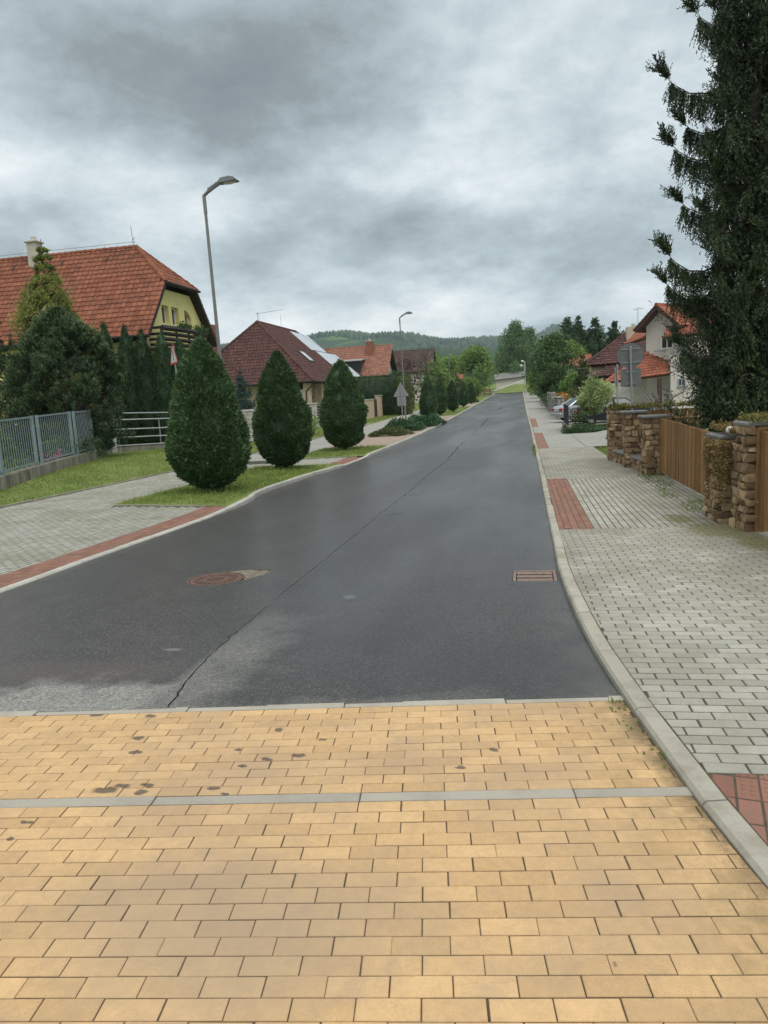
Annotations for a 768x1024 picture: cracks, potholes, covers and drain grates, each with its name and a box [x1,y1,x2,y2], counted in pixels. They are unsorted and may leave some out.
drain grate [512,570,558,581]
crack [167,611,261,708]
manhole cover [187,568,270,586]
